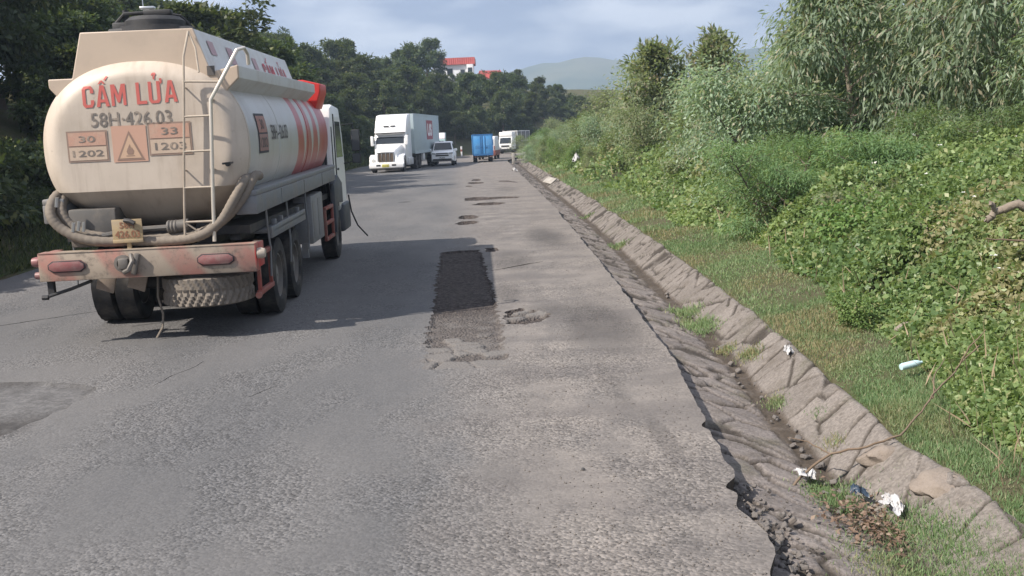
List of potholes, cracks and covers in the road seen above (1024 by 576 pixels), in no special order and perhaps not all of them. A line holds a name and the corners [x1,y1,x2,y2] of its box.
pothole [502,308,551,325]
